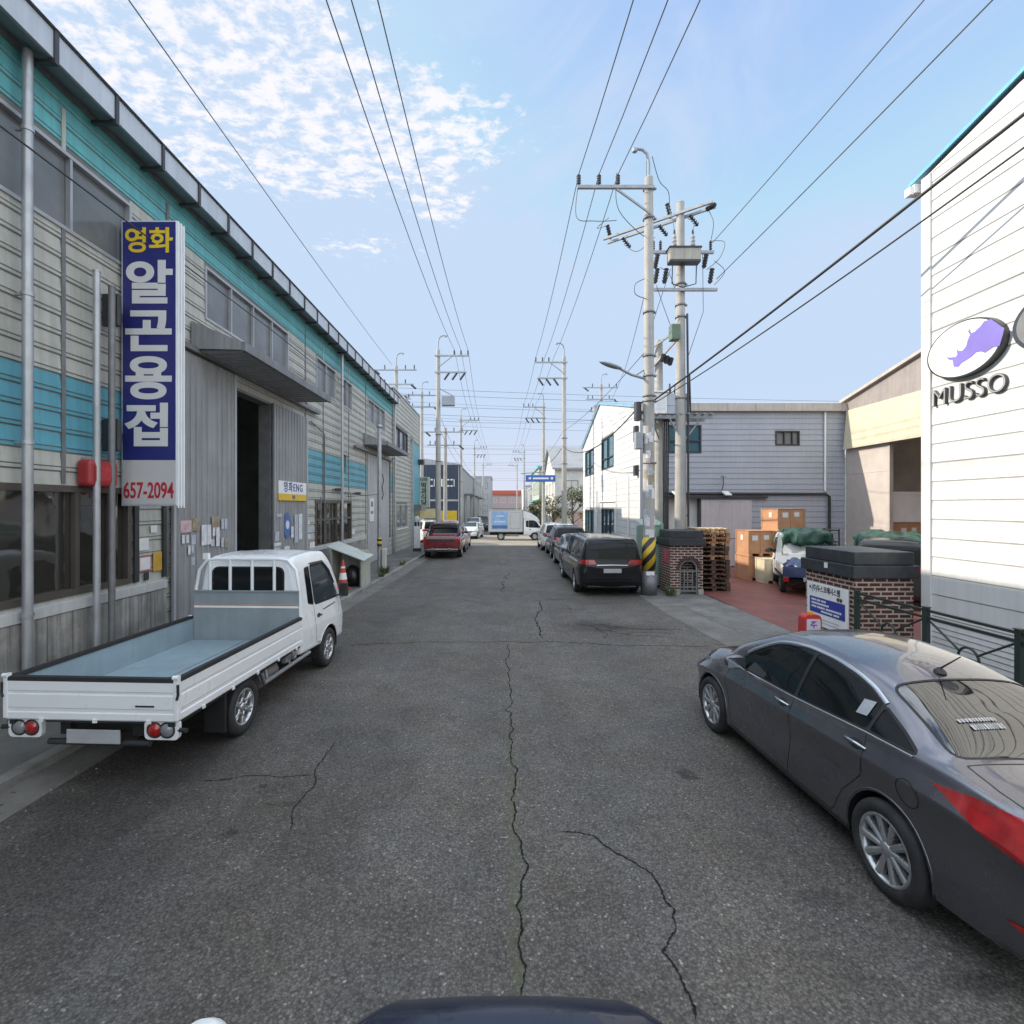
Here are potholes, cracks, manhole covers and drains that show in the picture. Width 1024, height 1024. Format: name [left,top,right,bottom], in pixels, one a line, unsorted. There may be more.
crack [207,743,335,831]
crack [350,599,704,994]
